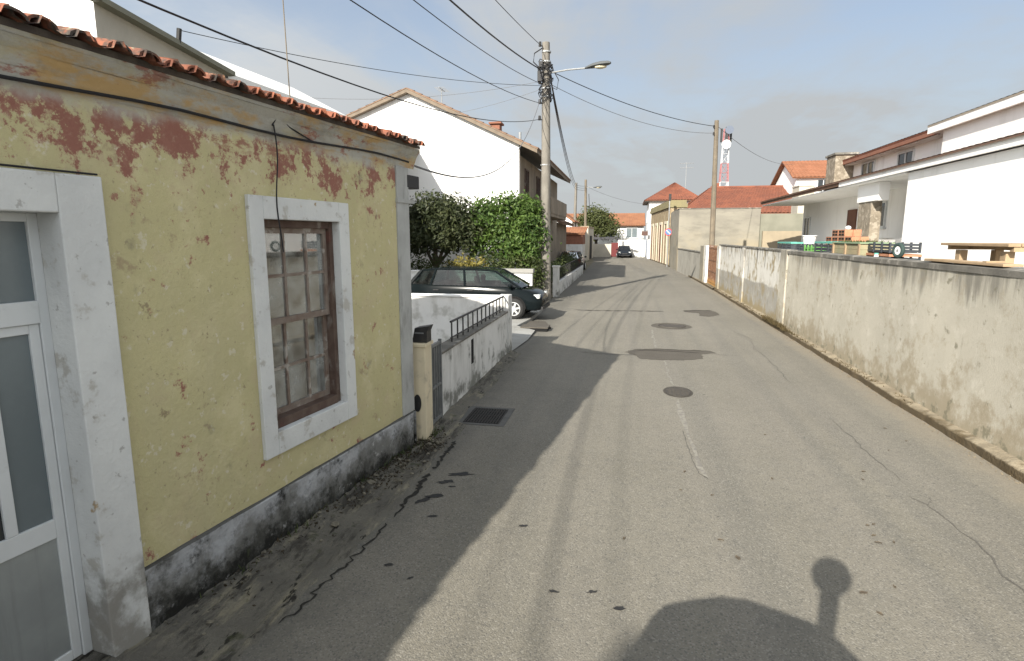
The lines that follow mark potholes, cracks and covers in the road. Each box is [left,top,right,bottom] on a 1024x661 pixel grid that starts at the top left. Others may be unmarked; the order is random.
crack [832,420,899,478]
crack [909,496,1024,591]
manhole cover [663,386,693,397]
crack [584,330,709,479]
drain grate [459,406,515,427]
